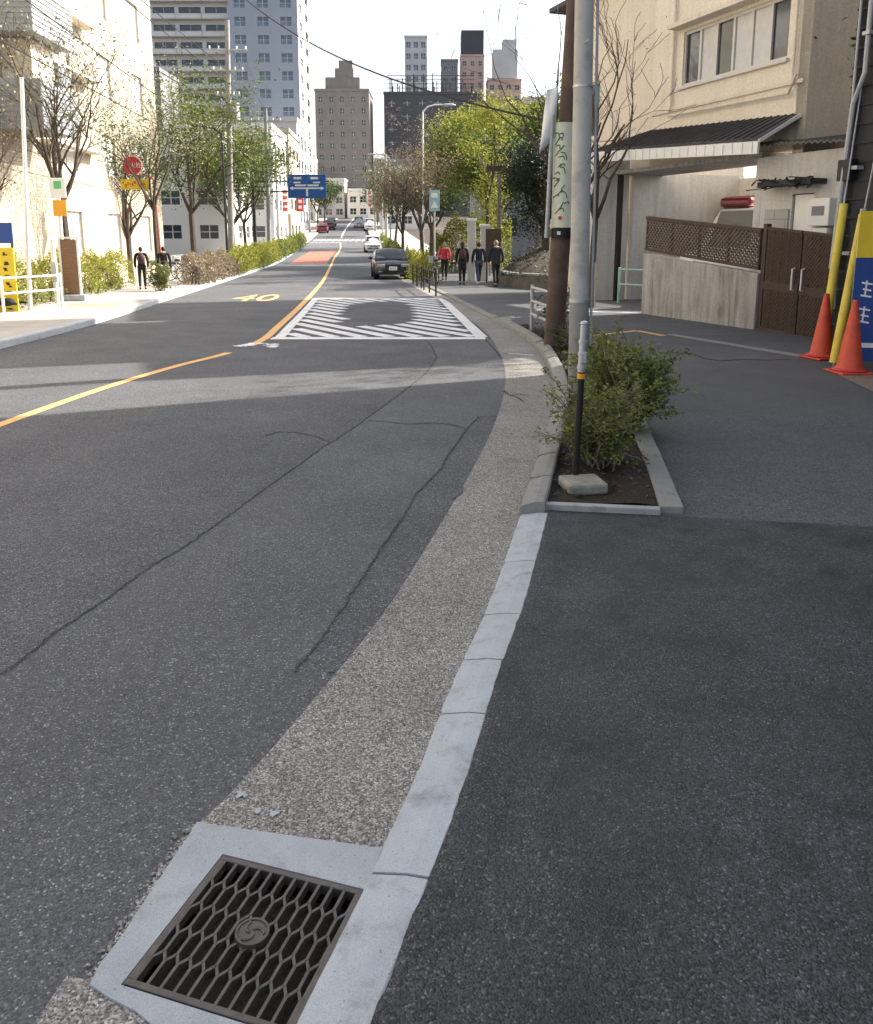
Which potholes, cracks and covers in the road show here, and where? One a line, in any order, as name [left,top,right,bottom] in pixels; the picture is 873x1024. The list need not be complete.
crack [0,339,437,675]
drain grate [124,855,364,1024]
